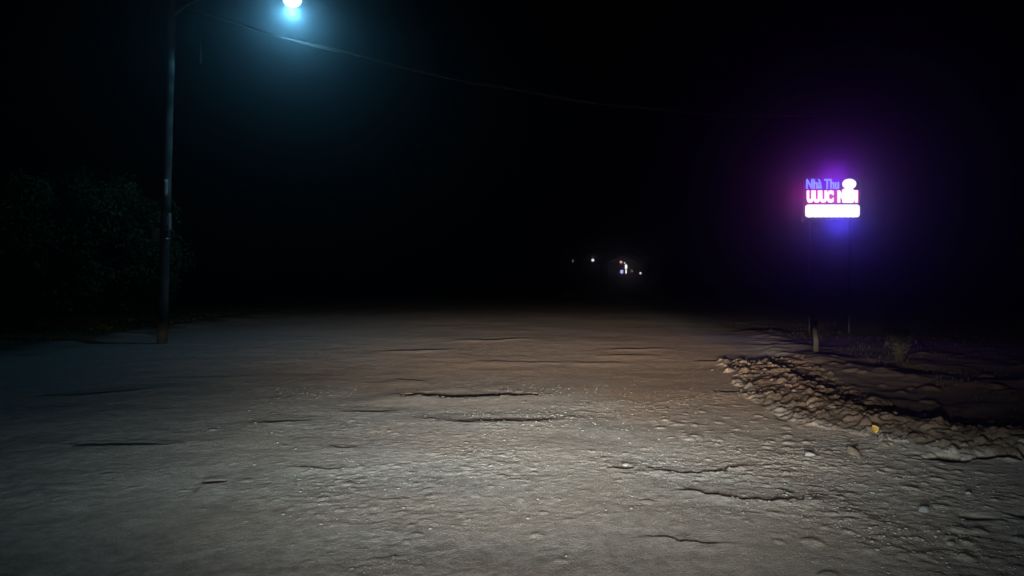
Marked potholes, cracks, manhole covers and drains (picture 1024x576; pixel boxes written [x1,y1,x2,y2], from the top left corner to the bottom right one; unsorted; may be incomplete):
crack [644,464,806,501]
crack [657,532,718,543]
